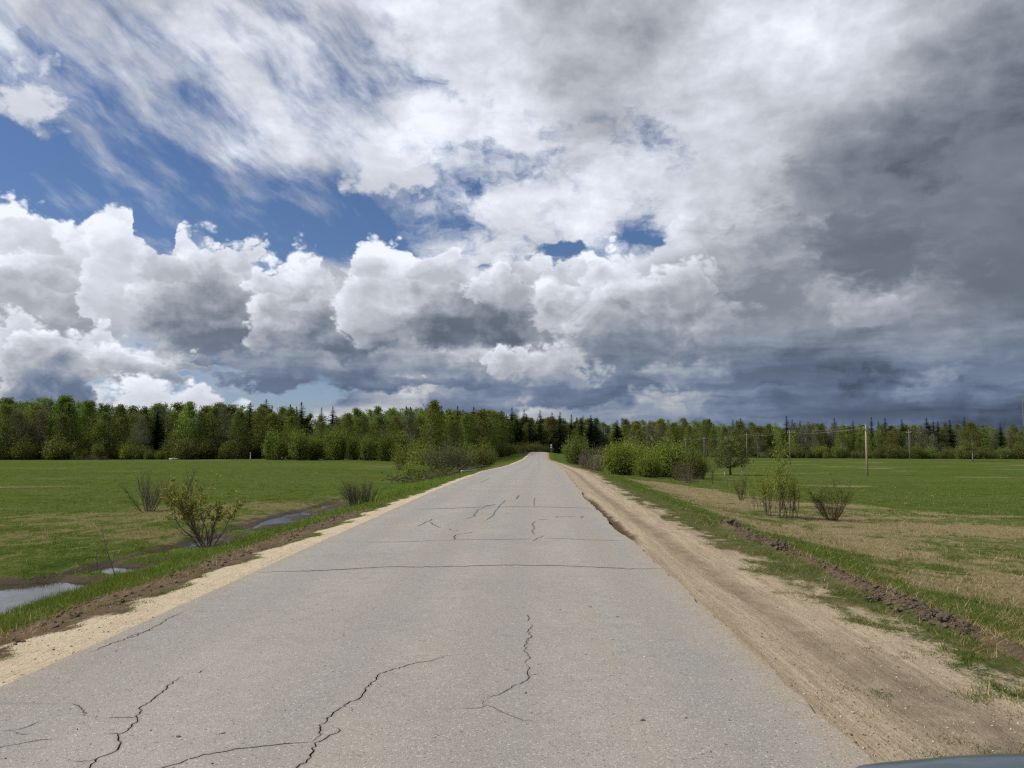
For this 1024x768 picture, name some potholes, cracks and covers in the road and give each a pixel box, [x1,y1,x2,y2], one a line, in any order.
crack [162,657,443,768]
crack [410,495,615,542]
crack [480,615,539,722]
crack [77,671,202,768]
